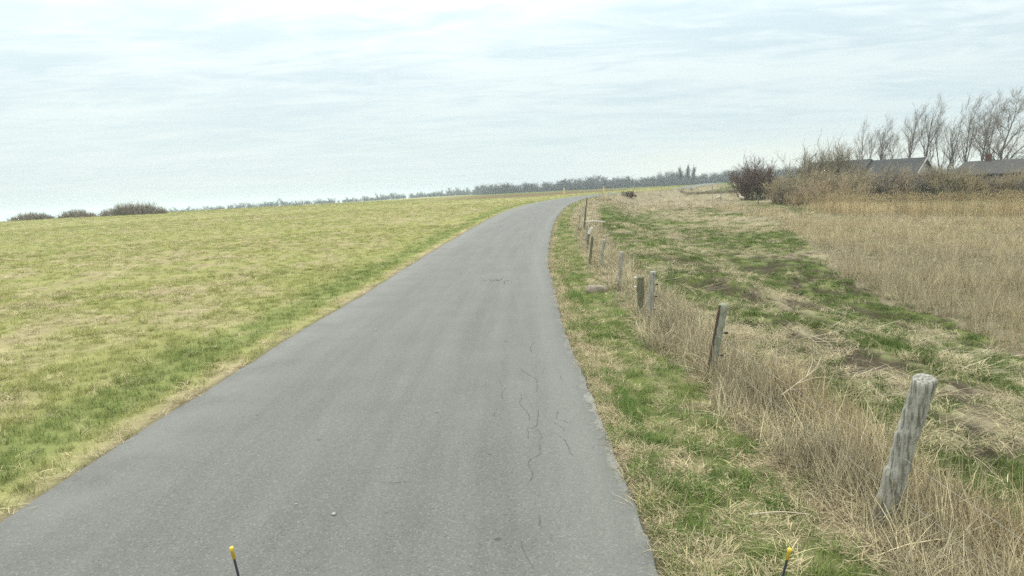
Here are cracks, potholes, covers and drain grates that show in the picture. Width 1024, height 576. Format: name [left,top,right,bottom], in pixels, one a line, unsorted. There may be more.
crack [494,347,573,486]
